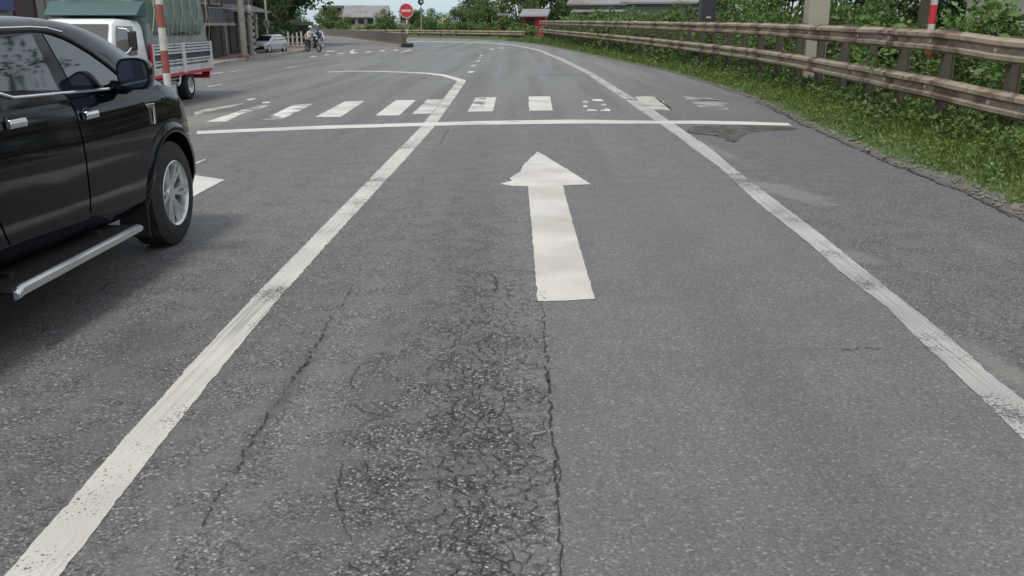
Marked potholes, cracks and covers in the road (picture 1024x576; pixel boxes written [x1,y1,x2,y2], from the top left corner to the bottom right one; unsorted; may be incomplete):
crack [335,258,554,576]
crack [171,276,358,576]
